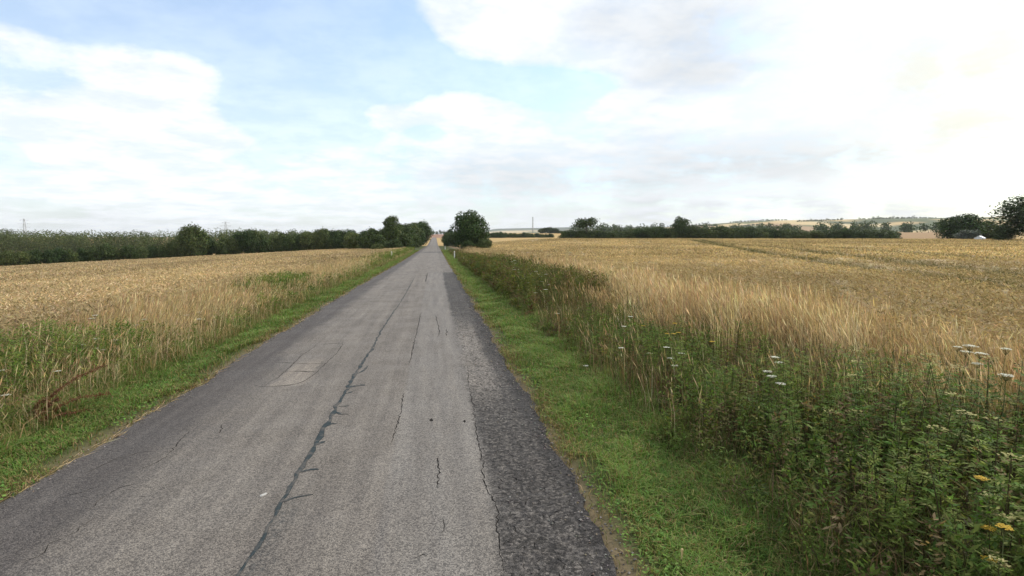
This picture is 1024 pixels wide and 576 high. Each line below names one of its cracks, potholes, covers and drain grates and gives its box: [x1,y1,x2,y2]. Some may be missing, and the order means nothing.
crack [455,311,596,576]
crack [409,313,448,363]
